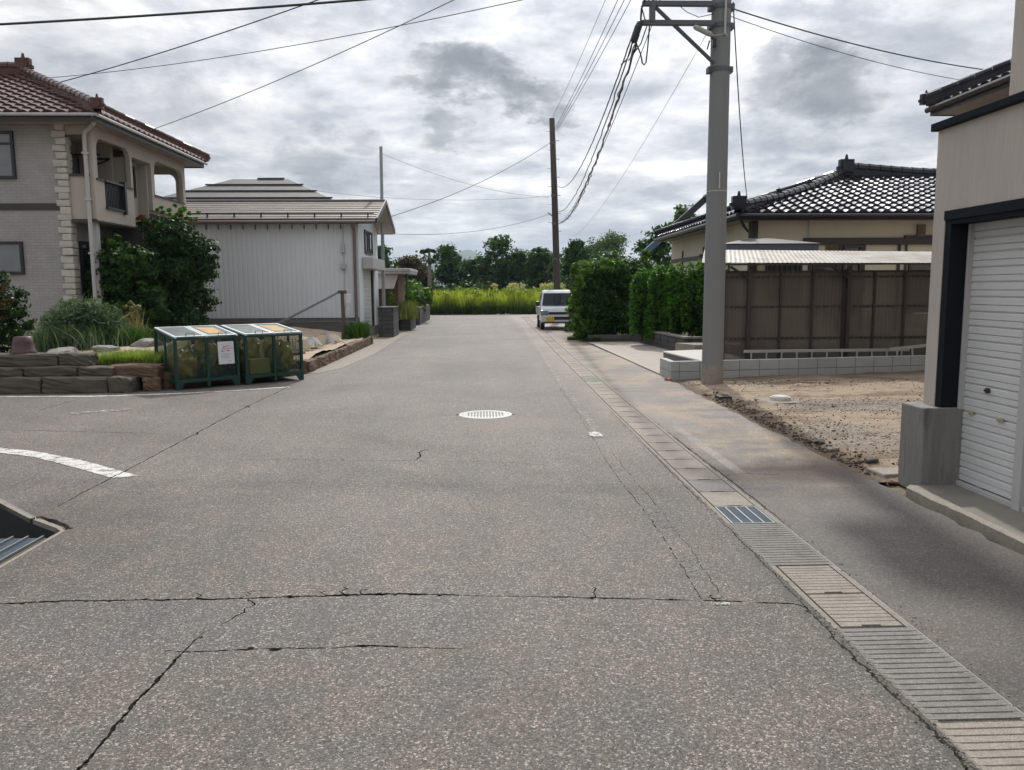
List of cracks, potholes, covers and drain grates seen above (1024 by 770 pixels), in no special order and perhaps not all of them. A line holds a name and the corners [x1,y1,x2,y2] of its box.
manhole cover [456,410,515,419]
crack [0,389,969,770]
drain grate [714,506,775,524]
